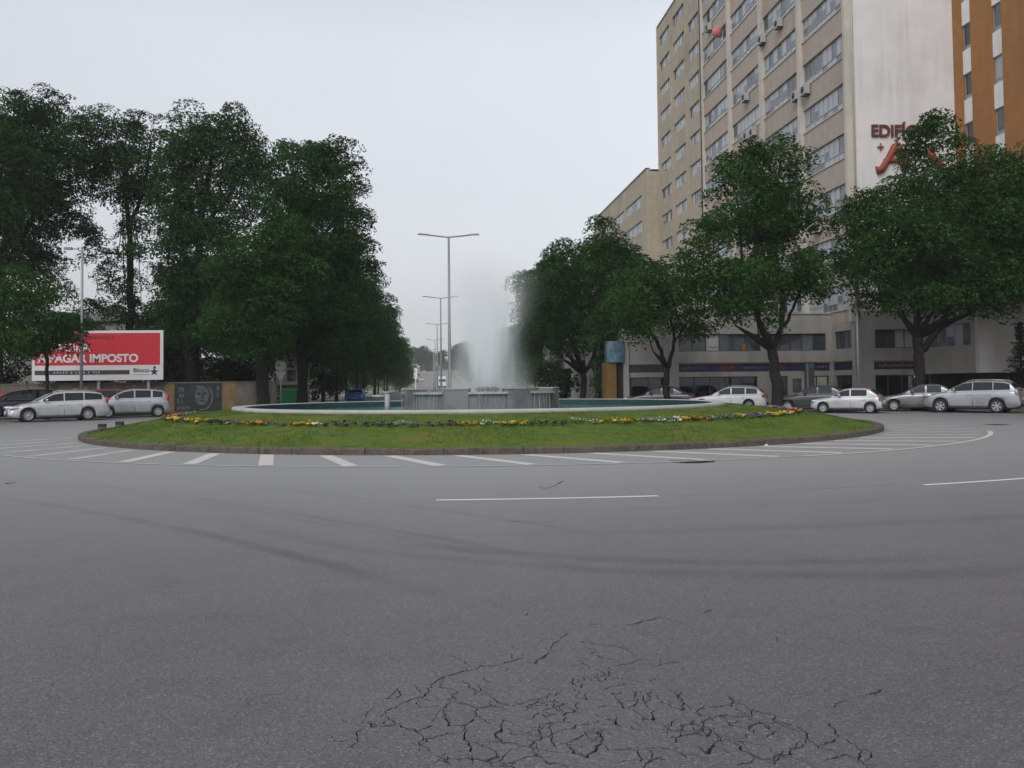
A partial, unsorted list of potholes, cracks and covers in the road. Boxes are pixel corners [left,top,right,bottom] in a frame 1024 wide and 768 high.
crack [824,689,882,708]
